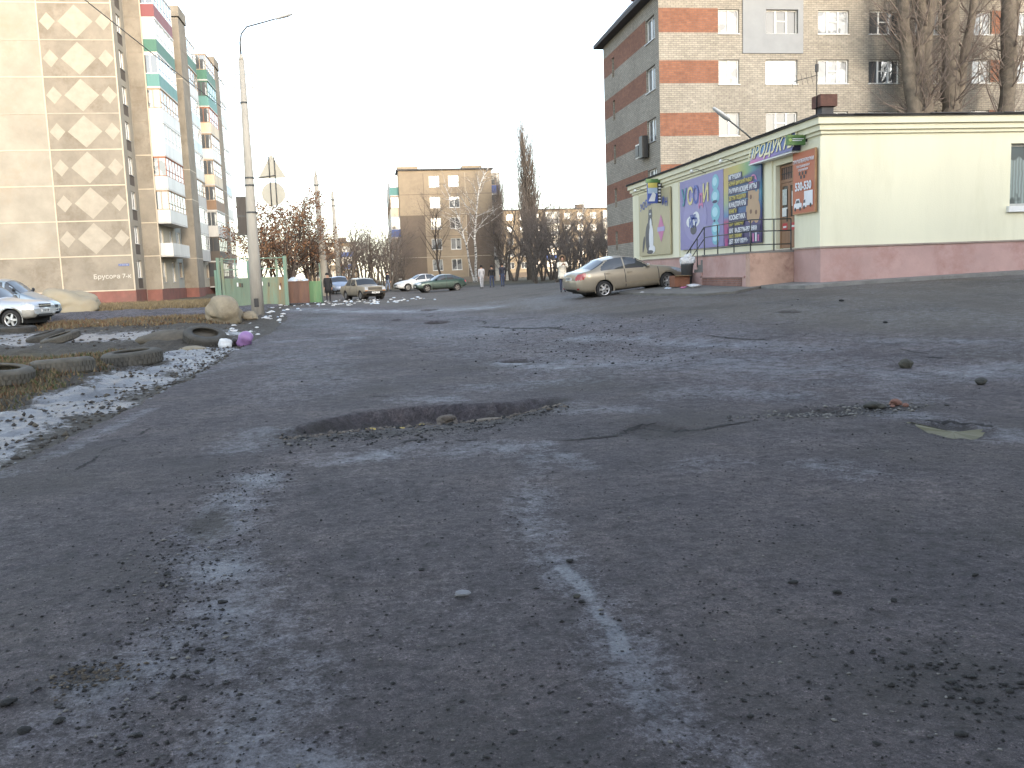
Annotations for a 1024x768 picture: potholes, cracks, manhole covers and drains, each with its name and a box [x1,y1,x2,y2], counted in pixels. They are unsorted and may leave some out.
crack [566,421,747,440]
pothole [263,397,666,445]
pothole [907,420,995,440]
pothole [773,407,867,417]
